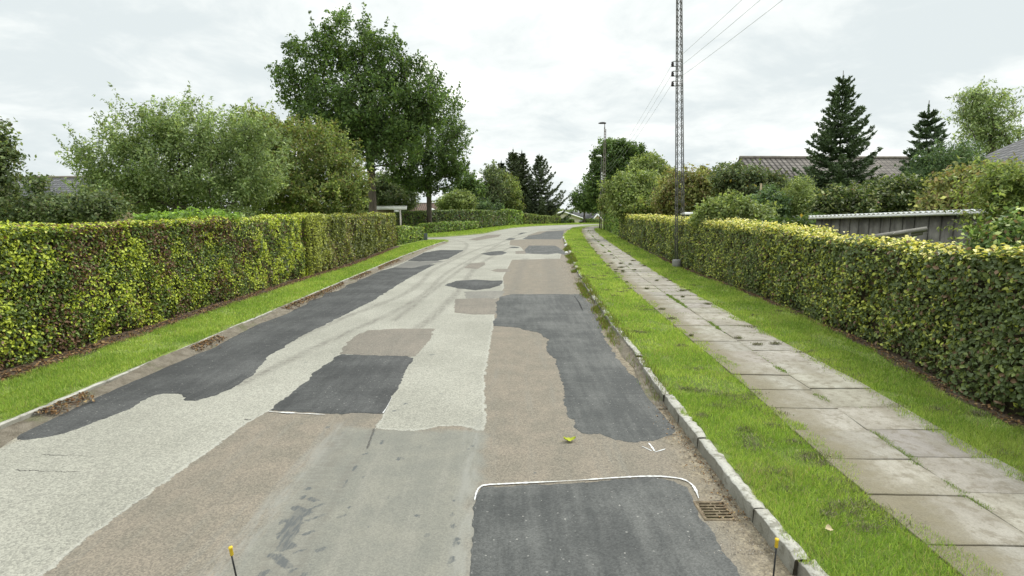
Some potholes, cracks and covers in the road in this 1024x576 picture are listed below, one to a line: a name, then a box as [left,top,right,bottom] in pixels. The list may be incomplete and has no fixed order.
drain grate [693,501,740,521]
